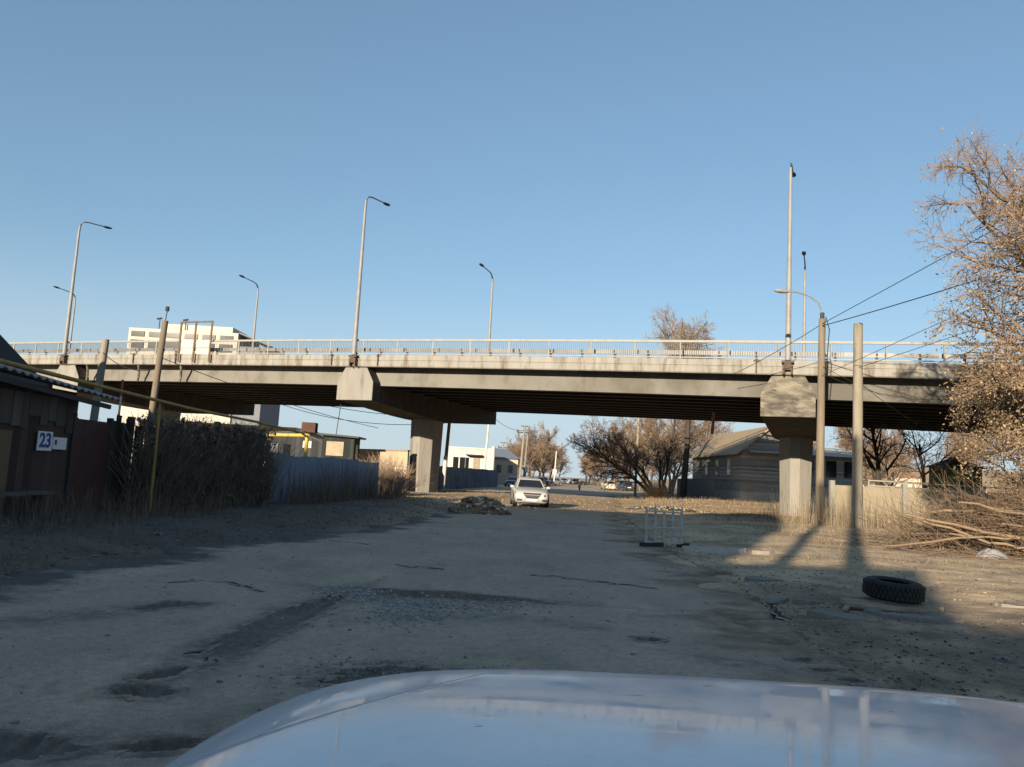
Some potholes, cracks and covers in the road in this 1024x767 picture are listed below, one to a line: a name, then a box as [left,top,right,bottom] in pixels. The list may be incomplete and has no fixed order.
pothole [337,586,558,604]
pothole [182,591,354,663]
pothole [121,664,201,684]
pothole [94,681,191,702]
crack [530,574,658,589]
pothole [122,600,214,612]
pothole [90,733,215,758]
crack [763,601,827,628]
pothole [0,728,108,767]
pothole [626,635,670,644]
crack [167,580,264,592]
